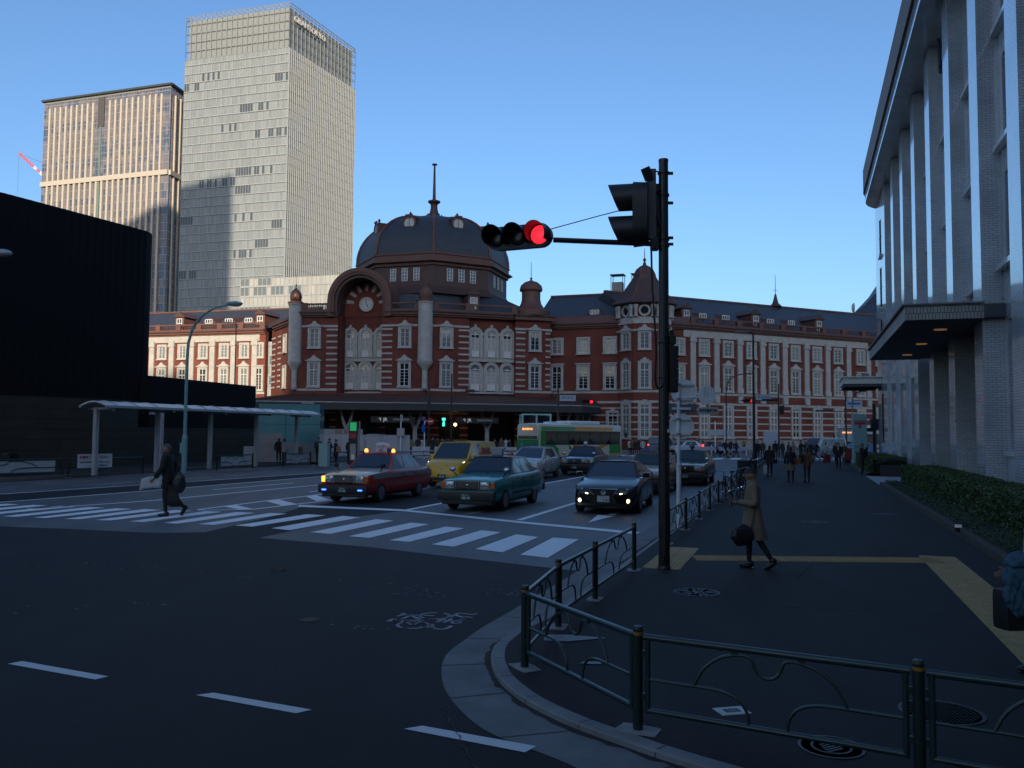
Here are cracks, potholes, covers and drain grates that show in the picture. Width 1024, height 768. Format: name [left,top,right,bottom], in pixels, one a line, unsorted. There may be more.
manhole cover [798,735,866,759]
manhole cover [673,588,720,597]
manhole cover [713,706,751,716]
crack [441,705,477,768]
